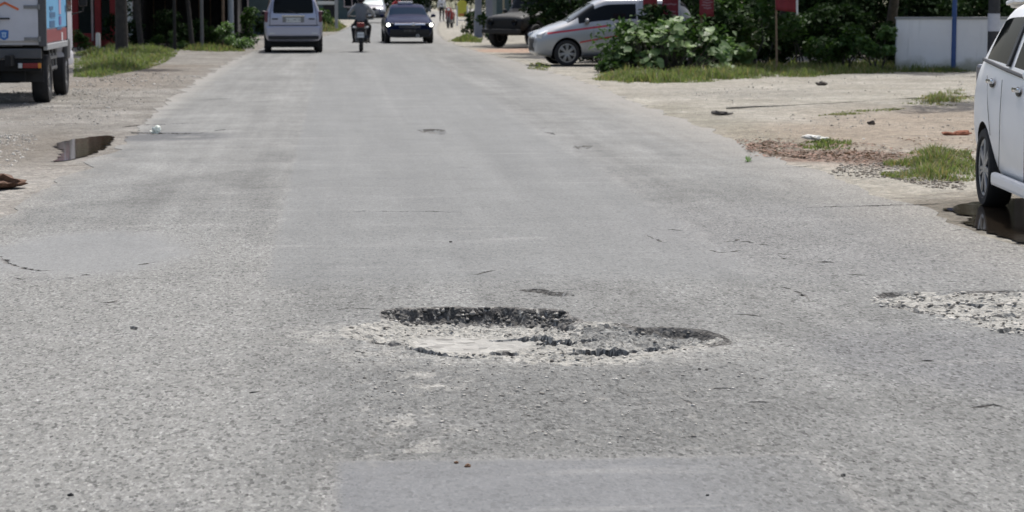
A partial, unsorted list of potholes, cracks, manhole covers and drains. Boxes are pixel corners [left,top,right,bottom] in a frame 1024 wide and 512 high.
crack [0,256,49,280]
pothole [870,290,1024,336]
pothole [335,306,733,367]
